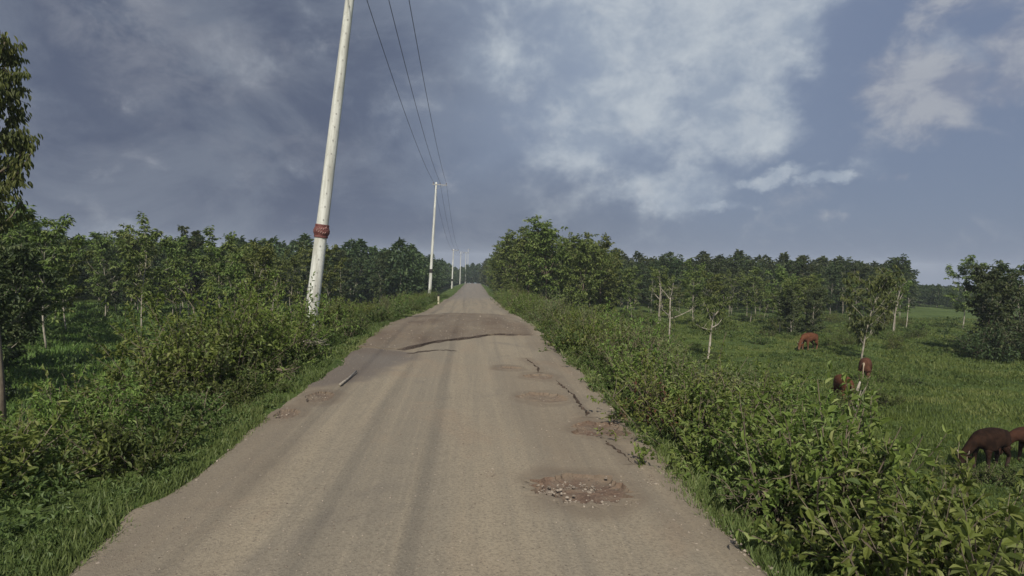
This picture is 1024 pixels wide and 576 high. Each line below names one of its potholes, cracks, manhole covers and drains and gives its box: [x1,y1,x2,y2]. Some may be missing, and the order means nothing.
pothole [565,419,638,441]
pothole [298,390,340,404]
pothole [518,373,557,381]
crack [521,358,640,464]
pothole [267,407,308,421]
crack [401,333,516,353]
pothole [508,391,573,405]
pothole [521,471,644,510]
